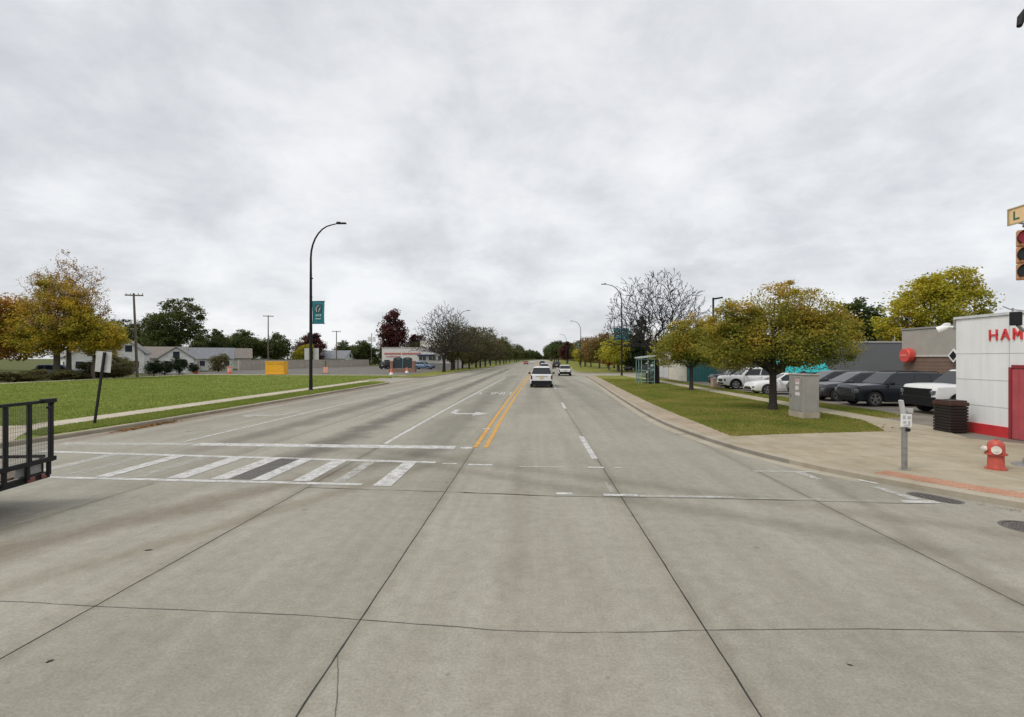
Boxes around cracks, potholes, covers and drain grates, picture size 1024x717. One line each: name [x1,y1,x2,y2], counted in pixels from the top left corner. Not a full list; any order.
manhole cover [997,520,1024,532]
